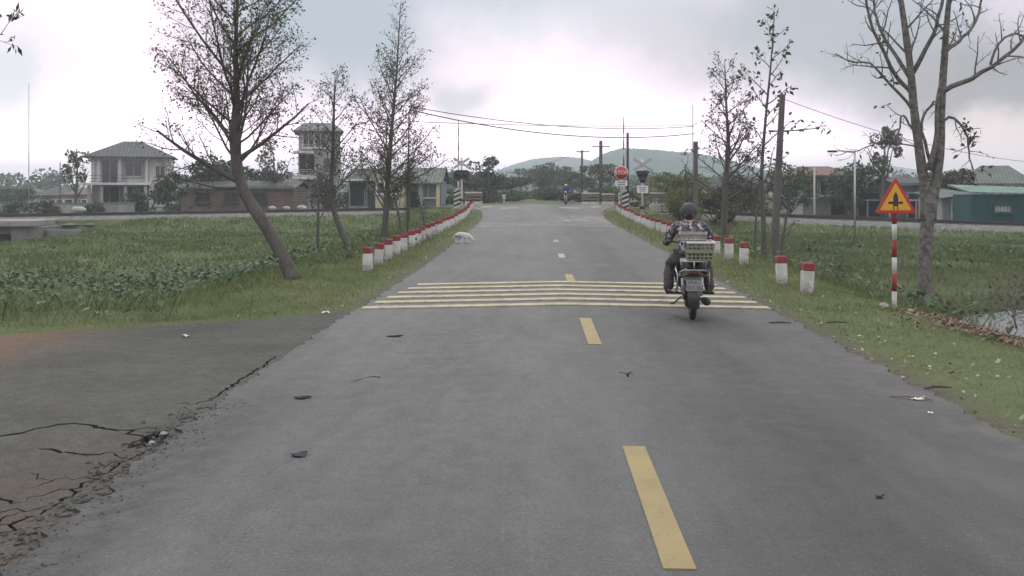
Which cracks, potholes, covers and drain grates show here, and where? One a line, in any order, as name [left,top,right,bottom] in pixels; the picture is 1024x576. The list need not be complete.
crack [178,356,276,404]
crack [0,423,154,533]
